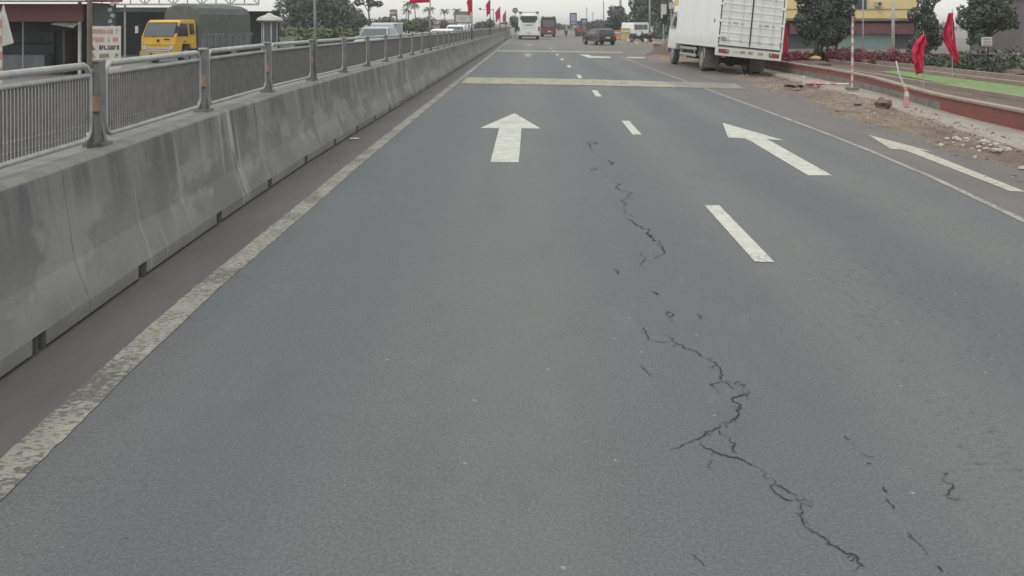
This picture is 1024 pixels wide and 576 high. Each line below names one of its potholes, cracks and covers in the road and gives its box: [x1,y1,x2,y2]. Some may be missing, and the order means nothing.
crack [615,183,665,266]
crack [643,327,863,570]
